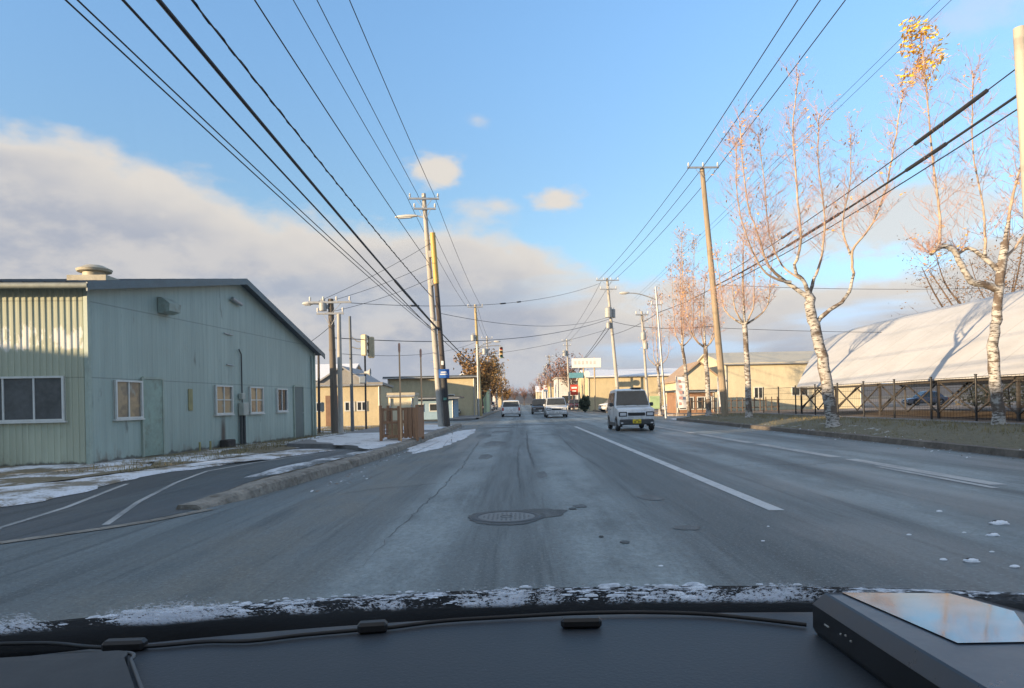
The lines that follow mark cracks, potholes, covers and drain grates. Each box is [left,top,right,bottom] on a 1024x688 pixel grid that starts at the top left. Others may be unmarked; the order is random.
manhole cover [467,510,546,525]
